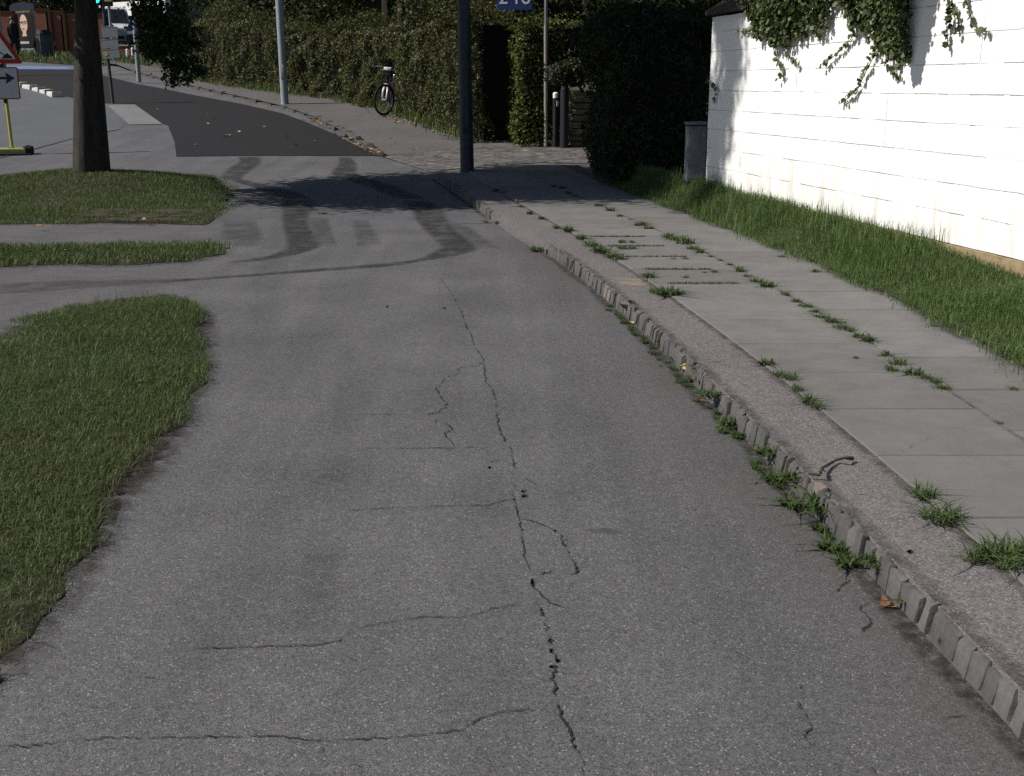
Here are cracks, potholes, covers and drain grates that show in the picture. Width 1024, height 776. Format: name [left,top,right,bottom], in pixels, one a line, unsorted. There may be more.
crack [2,708,554,765]
crack [204,603,536,663]
crack [348,280,583,774]
crack [797,684,812,744]
